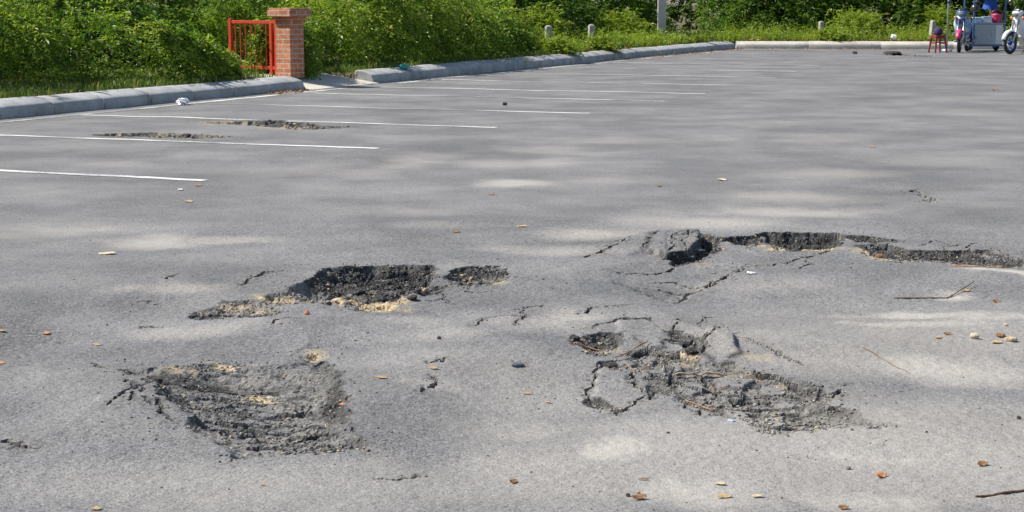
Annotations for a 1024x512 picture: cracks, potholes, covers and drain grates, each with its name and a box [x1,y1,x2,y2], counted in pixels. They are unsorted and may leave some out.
pothole [185,264,517,320]
crack [425,291,545,327]
crack [907,190,940,203]
pothole [201,120,348,130]
crack [237,270,284,285]
pothole [121,351,395,461]
pothole [660,231,1024,268]
pothole [567,317,910,436]
crack [573,228,825,366]
